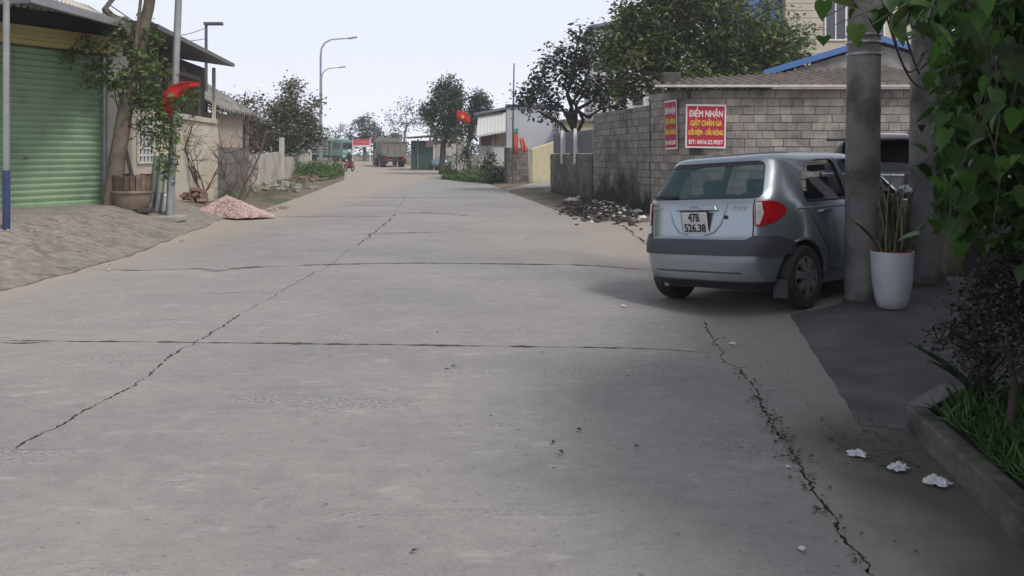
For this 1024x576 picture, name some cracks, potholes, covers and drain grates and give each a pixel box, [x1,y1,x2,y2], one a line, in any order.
crack [0,196,873,576]
